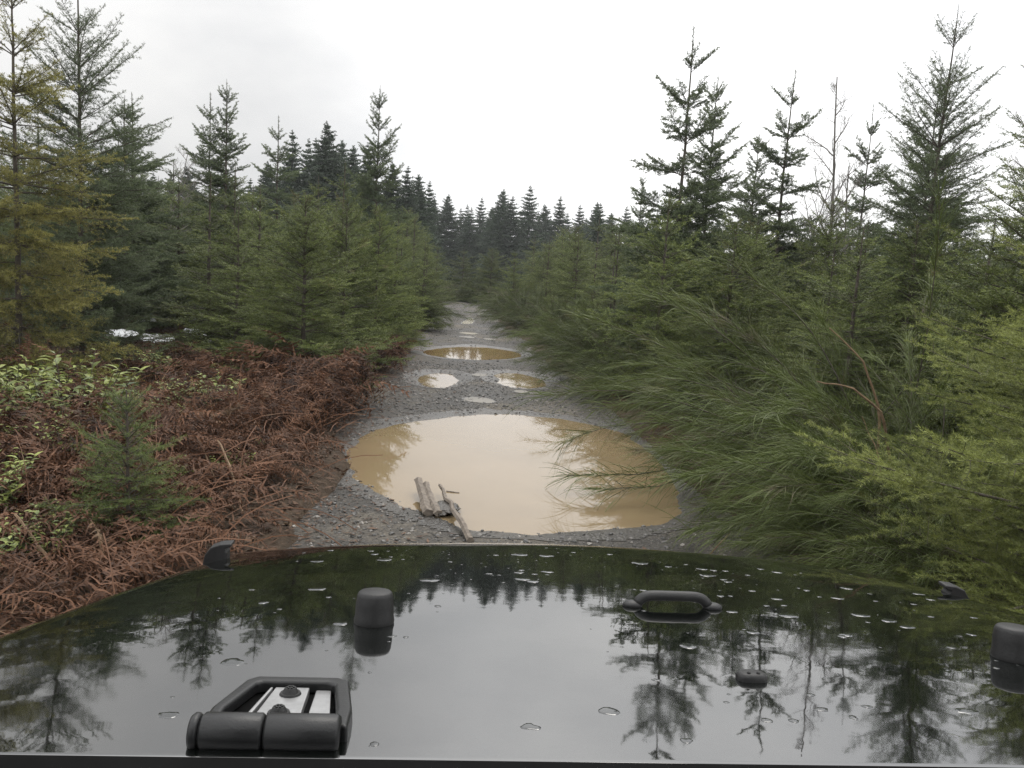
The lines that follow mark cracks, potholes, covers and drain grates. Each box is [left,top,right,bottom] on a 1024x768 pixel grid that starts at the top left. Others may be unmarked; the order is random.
pothole [411,344,533,360]
pothole [402,369,475,389]
pothole [477,369,560,390]
pothole [334,408,708,542]
